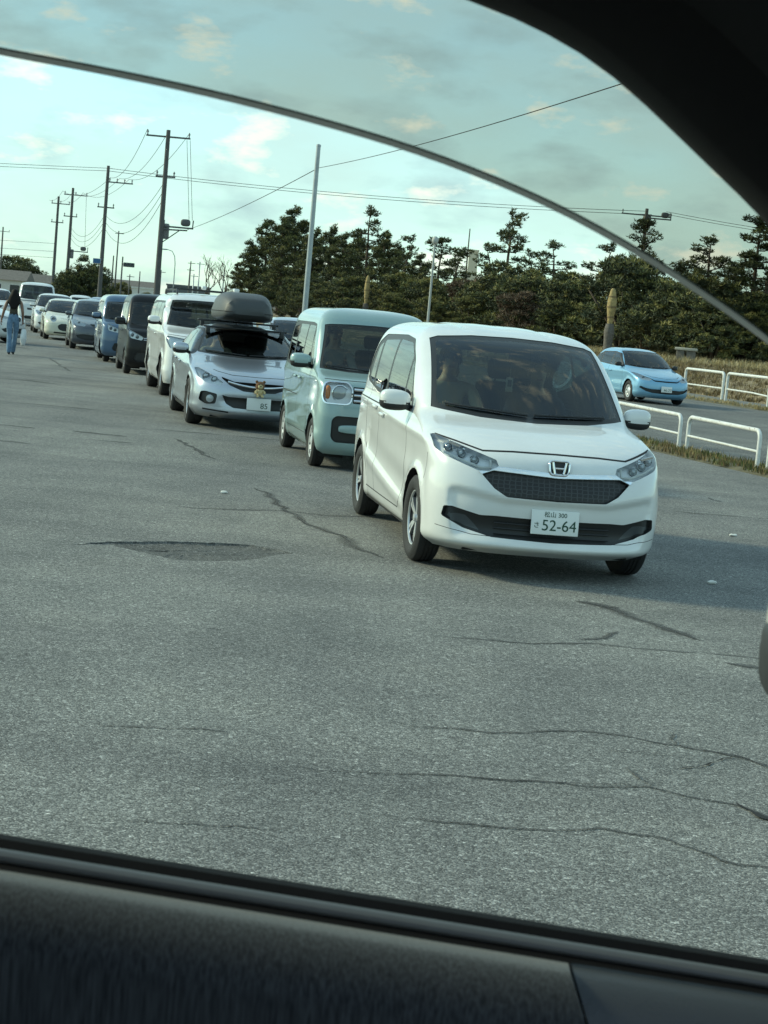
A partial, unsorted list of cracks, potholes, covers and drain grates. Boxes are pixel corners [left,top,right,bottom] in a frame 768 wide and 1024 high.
crack [281,725,768,820]
crack [159,429,264,459]
pothole [75,541,292,561]
crack [413,601,759,668]
crack [128,820,290,830]
crack [189,488,384,558]
crack [384,813,767,867]
